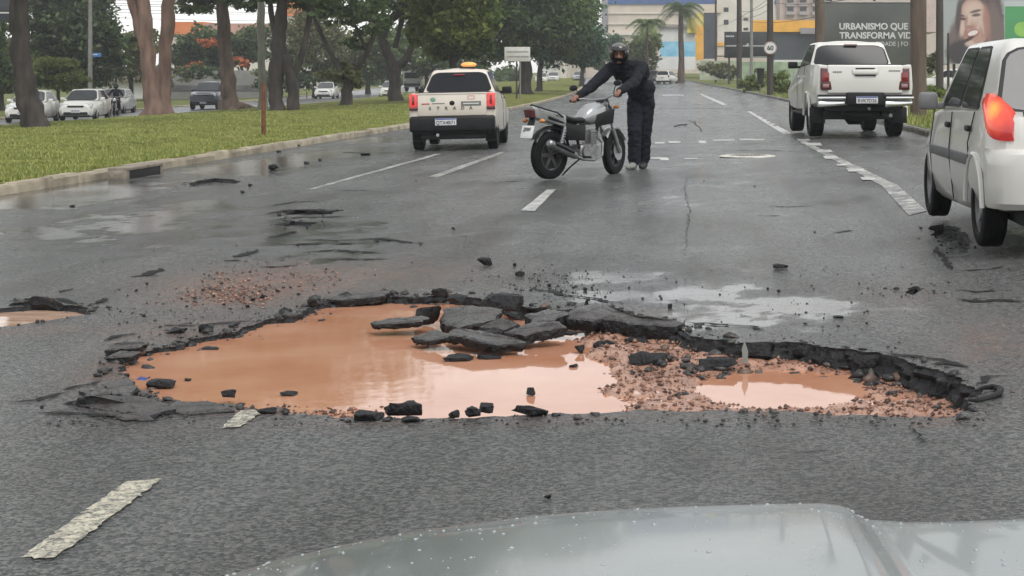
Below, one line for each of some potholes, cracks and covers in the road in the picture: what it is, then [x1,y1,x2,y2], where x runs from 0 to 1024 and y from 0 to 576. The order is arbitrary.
pothole [928,224,973,255]
pothole [189,178,241,187]
crack [224,200,423,267]
drain grate [108,162,163,180]
pothole [118,295,983,419]
pothole [0,305,88,327]
